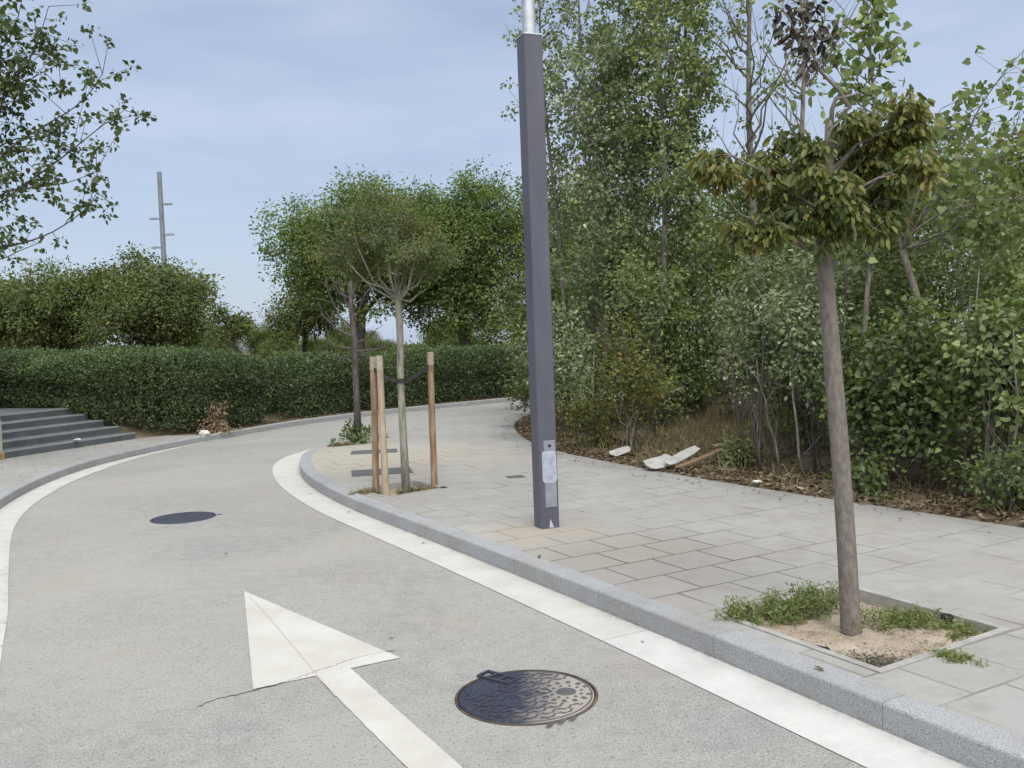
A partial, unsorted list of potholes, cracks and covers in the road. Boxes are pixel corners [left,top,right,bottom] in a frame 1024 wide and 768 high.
manhole cover [455,669,598,729]
crack [197,651,391,707]
manhole cover [150,512,222,524]
